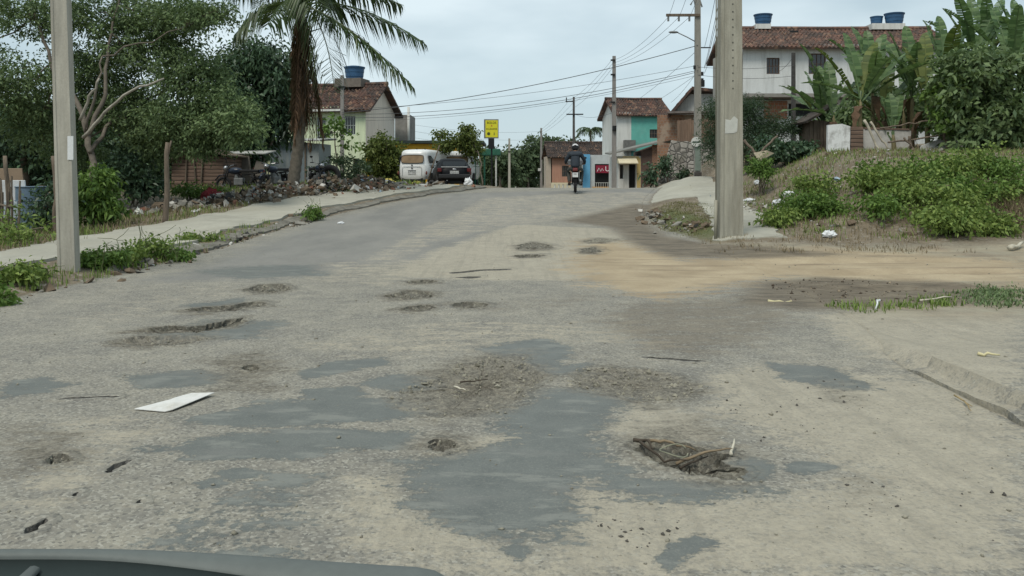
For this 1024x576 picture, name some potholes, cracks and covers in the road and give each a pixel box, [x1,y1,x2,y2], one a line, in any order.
pothole [388,355,559,421]
pothole [375,289,442,302]
pothole [621,436,761,485]
pothole [233,283,299,295]
pothole [442,300,497,310]
pothole [416,435,470,456]
pothole [505,241,564,253]
crack [634,355,713,363]
pothole [163,300,277,315]
crack [442,268,518,280]
pothole [566,246,615,256]
